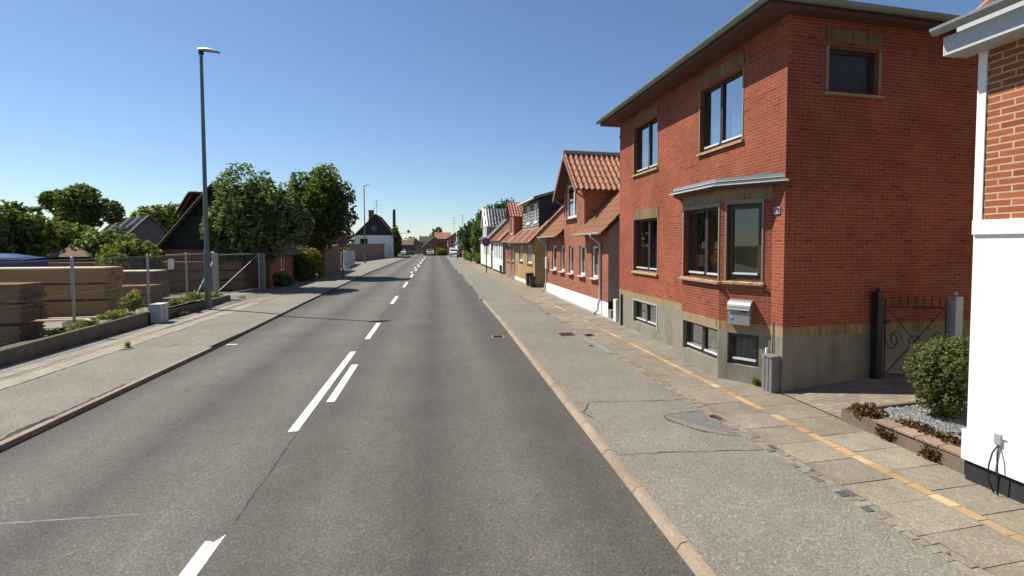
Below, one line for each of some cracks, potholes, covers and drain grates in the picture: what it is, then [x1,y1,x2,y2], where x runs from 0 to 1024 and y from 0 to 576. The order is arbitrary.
crack [580,399,763,455]
